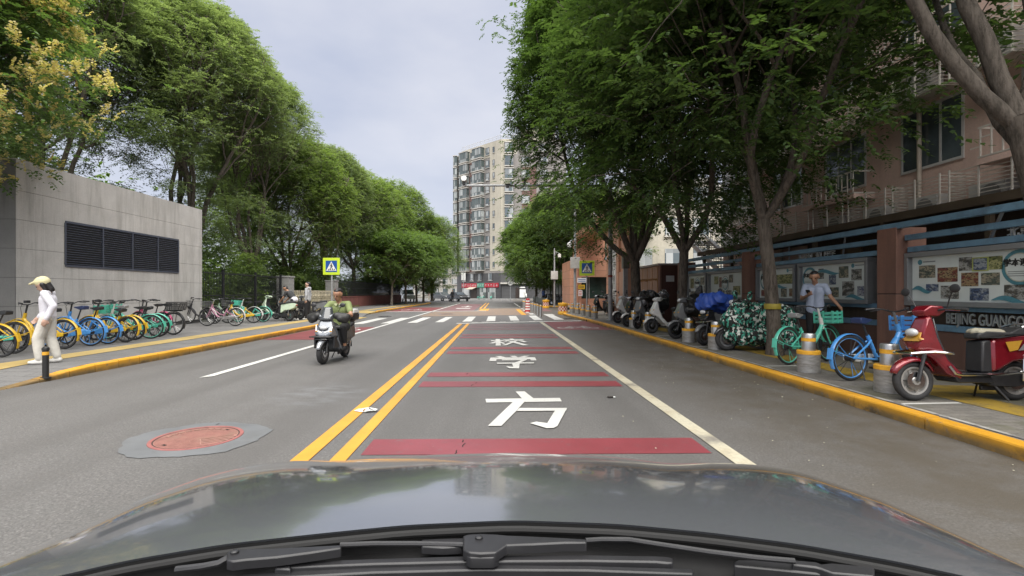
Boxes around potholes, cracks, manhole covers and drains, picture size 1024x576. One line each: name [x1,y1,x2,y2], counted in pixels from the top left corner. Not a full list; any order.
manhole cover [118,422,273,458]
